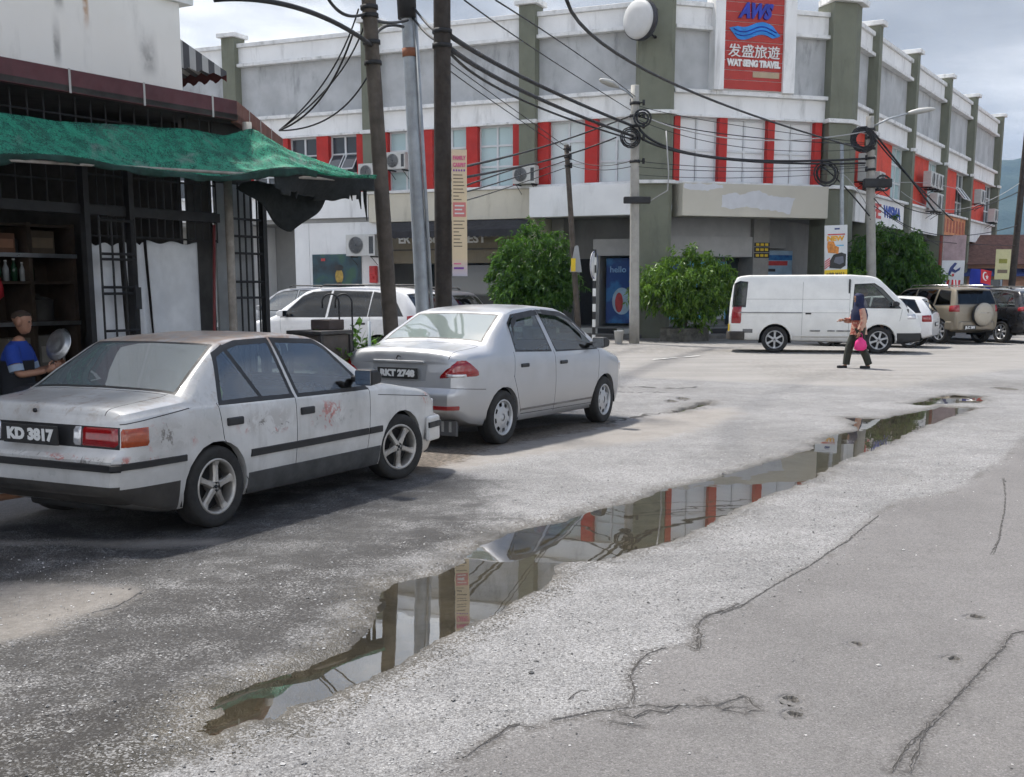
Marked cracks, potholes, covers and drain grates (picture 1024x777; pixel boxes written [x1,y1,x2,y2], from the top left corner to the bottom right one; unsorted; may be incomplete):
crack [462,723,534,758]
crack [990,478,1007,555]
pothole [781,710,807,719]
crack [891,631,1024,773]
pothole [778,695,803,706]
crack [552,515,879,727]
